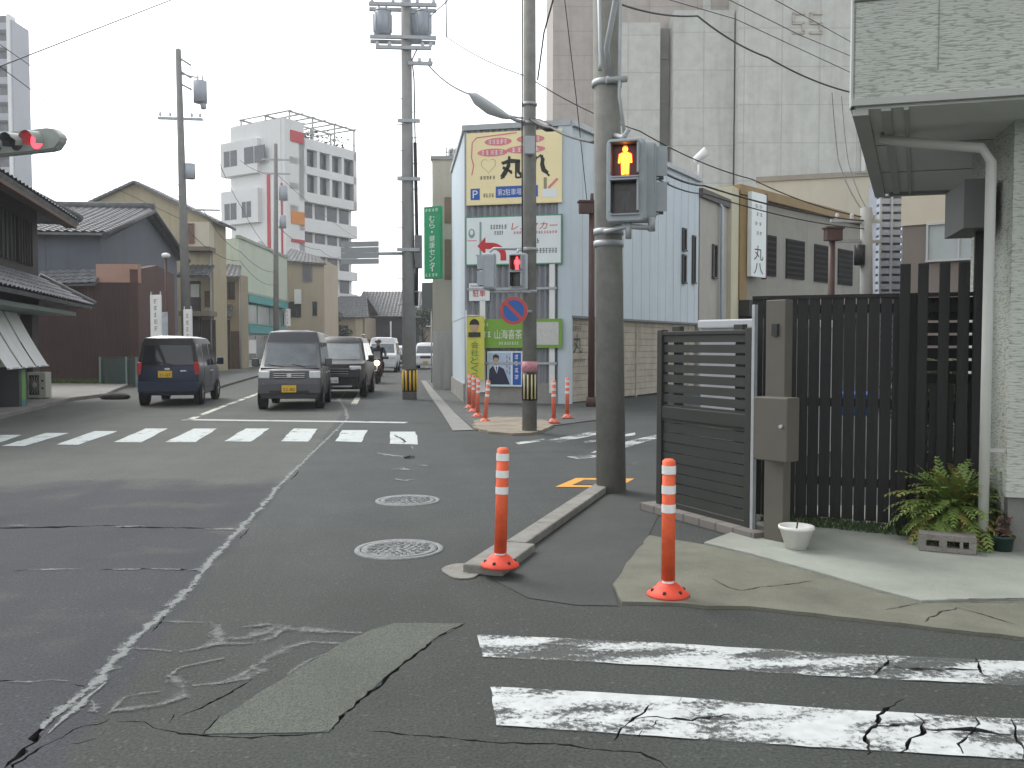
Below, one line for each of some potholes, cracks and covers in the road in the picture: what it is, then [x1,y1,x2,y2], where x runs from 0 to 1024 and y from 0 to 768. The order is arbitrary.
crack [875,658,995,681]
crack [380,435,427,481]
crack [885,603,1010,623]
crack [0,621,728,768]
crack [863,699,1024,762]
manhole cover [375,495,440,507]
manhole cover [354,539,444,560]
